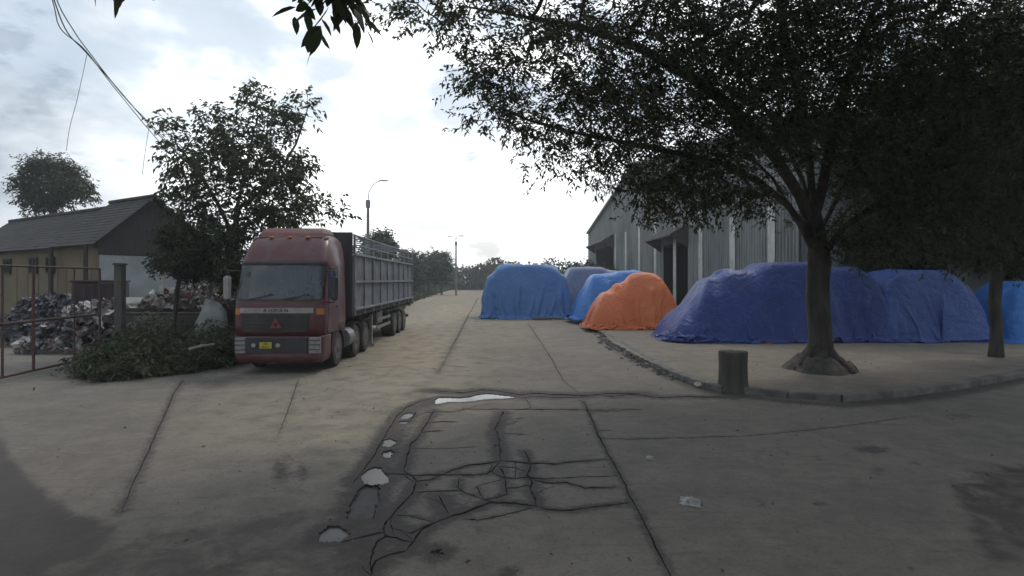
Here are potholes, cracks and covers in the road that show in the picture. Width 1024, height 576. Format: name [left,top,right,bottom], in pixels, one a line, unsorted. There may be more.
crack [341,389,727,575]
pothole [318,525,350,542]
pothole [435,393,514,404]
pothole [360,467,391,488]
